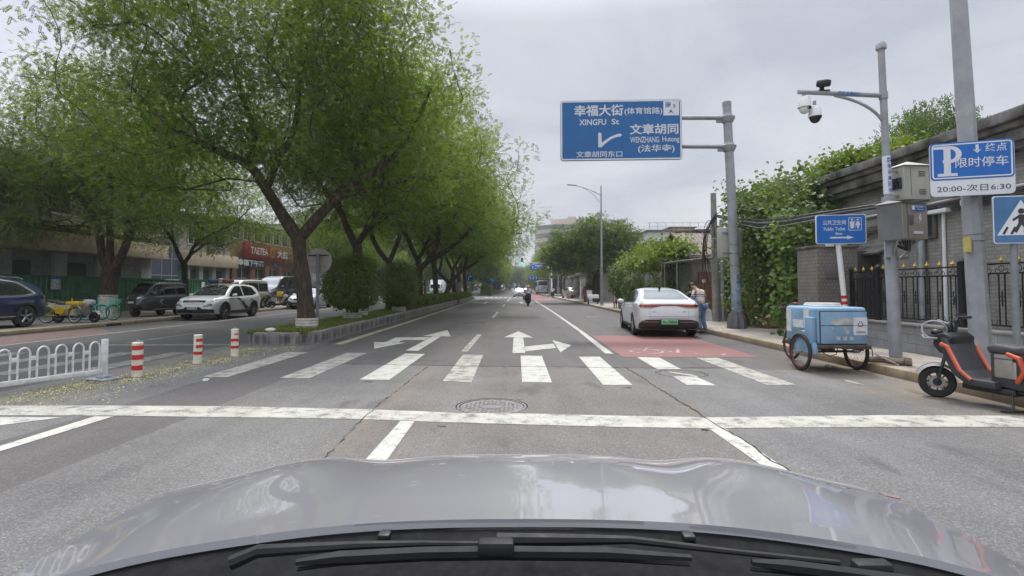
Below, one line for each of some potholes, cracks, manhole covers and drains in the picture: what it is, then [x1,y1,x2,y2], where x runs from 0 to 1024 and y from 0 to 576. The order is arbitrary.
crack [625,368,791,471]
manhole cover [456,399,528,413]
manhole cover [656,369,708,377]
